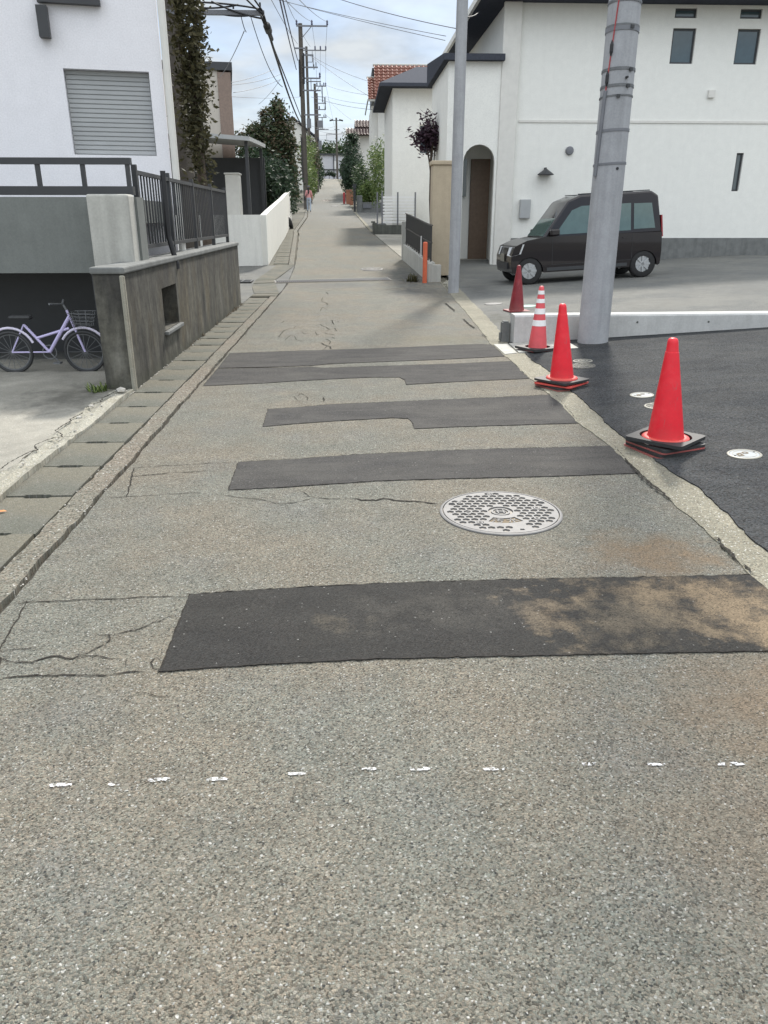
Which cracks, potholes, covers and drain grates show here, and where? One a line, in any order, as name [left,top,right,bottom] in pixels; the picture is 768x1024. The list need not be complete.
manhole cover [727,449,763,460]
crack [124,462,438,504]
crack [278,289,337,350]
crack [0,596,188,678]
manhole cover [440,491,563,536]
